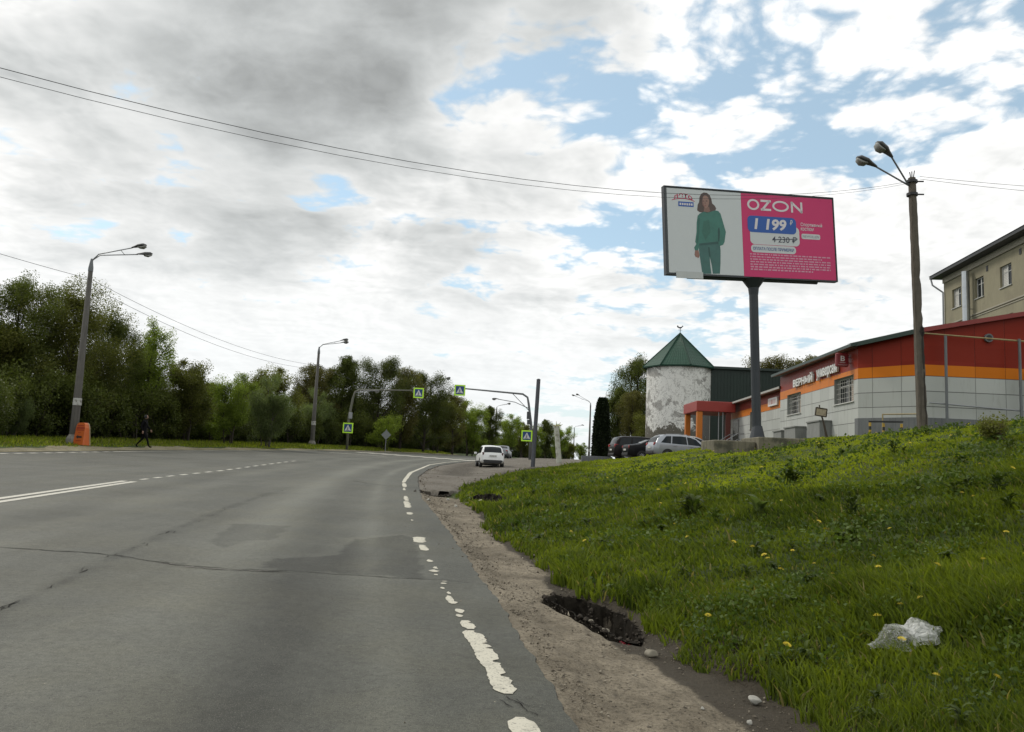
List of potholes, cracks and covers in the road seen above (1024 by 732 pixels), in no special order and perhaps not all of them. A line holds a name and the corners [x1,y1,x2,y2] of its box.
pothole [542,592,645,647]
pothole [470,493,506,503]
crack [0,490,485,609]
